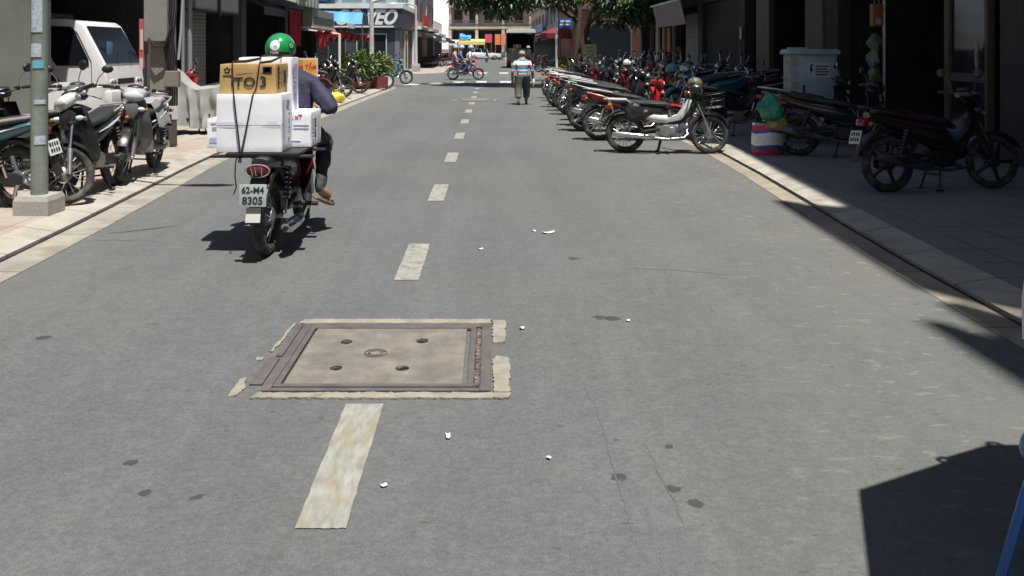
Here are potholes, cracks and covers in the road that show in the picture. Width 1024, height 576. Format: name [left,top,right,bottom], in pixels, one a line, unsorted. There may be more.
crack [585,390,685,543]
manhole cover [228,318,511,400]
